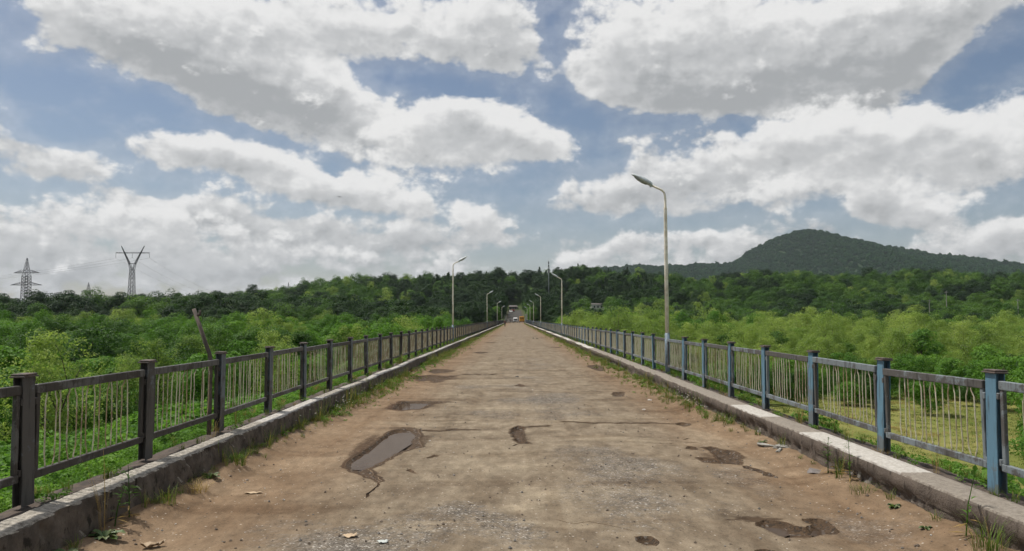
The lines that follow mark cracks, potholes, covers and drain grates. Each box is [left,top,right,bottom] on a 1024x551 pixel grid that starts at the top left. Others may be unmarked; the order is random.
pothole [697,447,743,464]
pothole [740,465,777,478]
pothole [392,401,443,409]
pothole [344,428,423,482]
pothole [634,536,660,546]
pothole [755,518,841,538]
pothole [510,426,529,444]
crack [529,421,695,444]
pothole [415,375,457,383]
